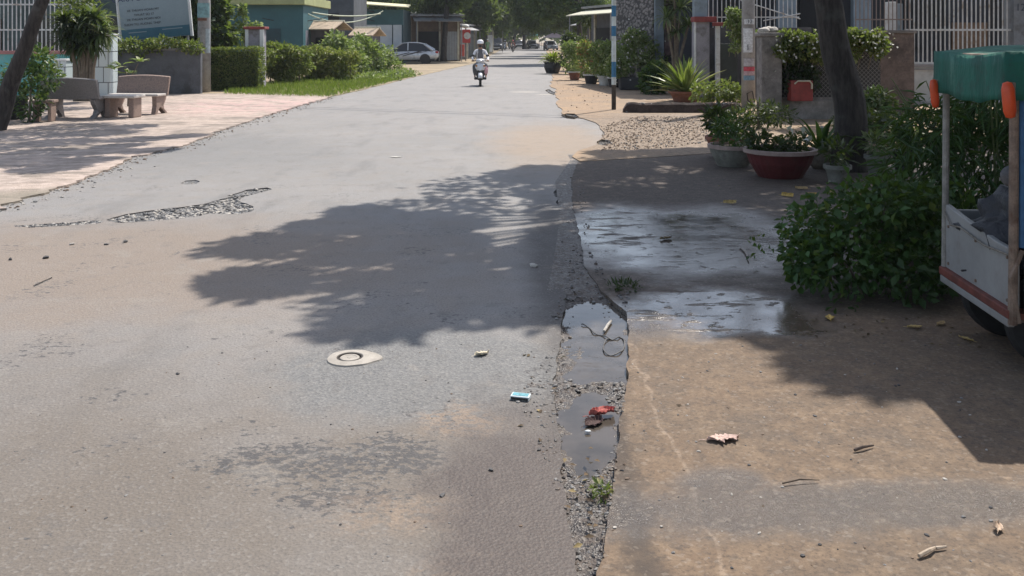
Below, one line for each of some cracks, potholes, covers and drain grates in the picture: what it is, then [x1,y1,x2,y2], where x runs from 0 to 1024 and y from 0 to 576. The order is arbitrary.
pothole [107,196,254,223]
pothole [228,188,271,199]
manhole cover [327,350,383,367]
